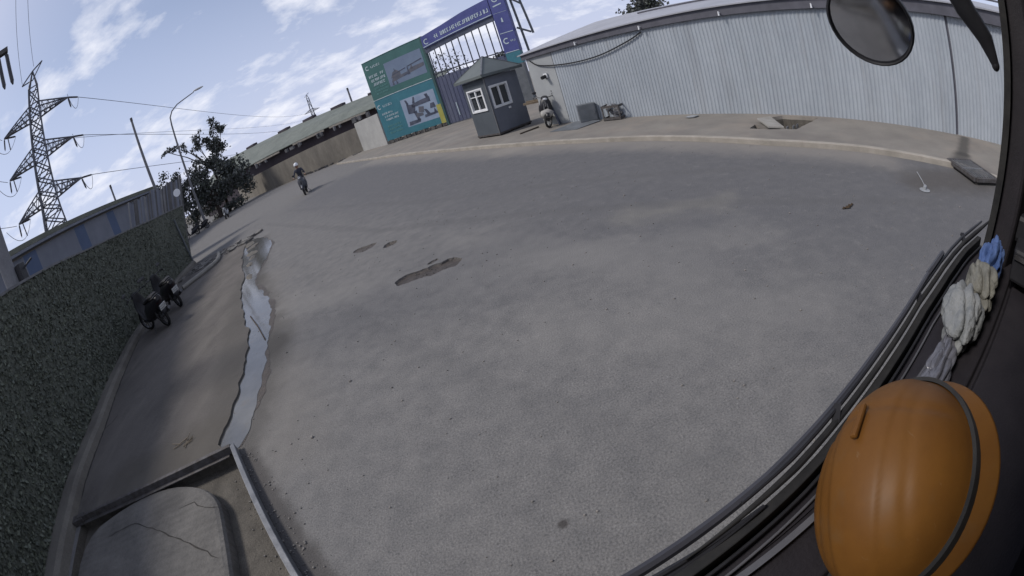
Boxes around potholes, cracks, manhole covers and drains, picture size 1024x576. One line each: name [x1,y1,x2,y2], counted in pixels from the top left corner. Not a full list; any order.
pothole [395,257,462,286]
drain grate [947,158,997,186]
crack [108,501,221,558]
